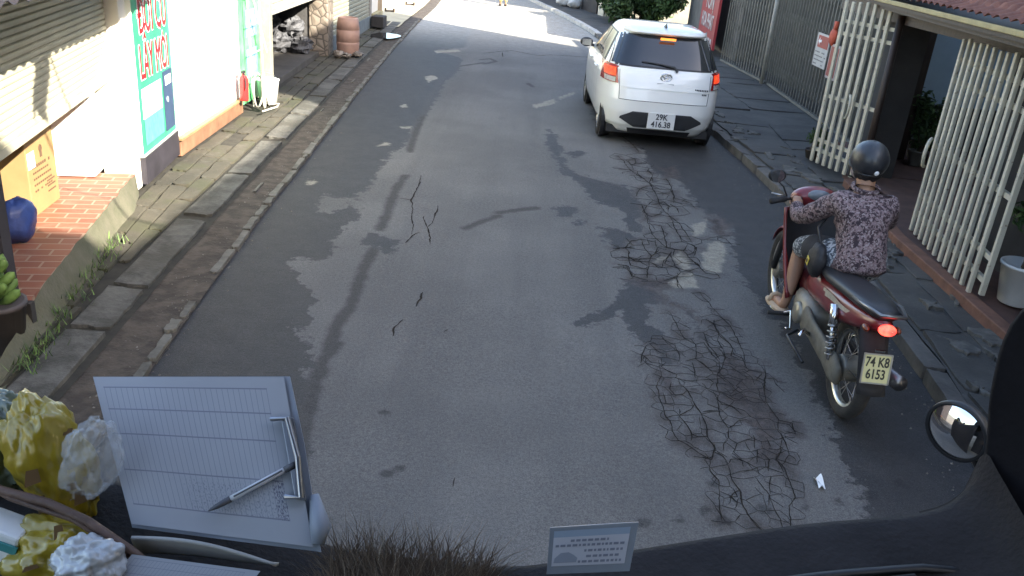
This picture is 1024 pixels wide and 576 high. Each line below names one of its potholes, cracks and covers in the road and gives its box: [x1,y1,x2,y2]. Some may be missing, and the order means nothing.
crack [609,135,741,289]
crack [402,177,438,243]
crack [392,292,423,336]
crack [633,293,806,530]
